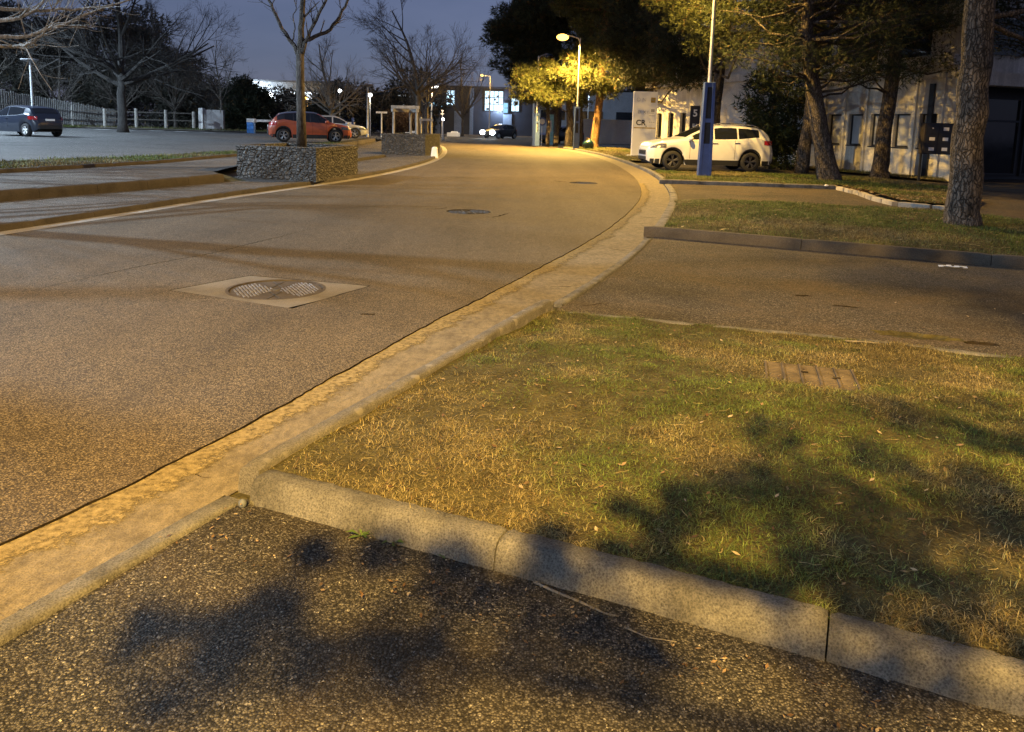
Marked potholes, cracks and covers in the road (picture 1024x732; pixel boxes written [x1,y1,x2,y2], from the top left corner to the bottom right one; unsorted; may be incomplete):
manhole cover [173,276,367,308]
